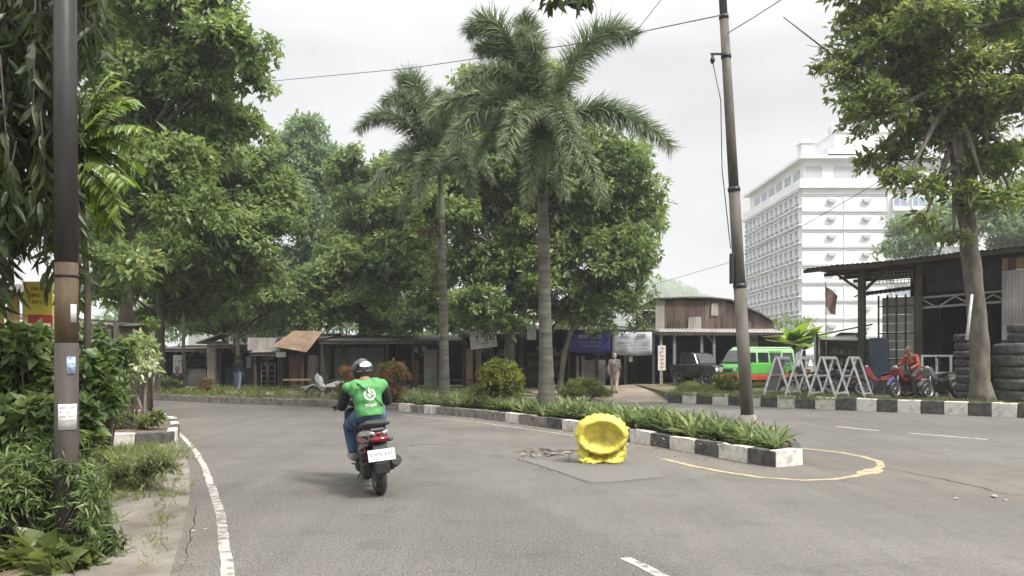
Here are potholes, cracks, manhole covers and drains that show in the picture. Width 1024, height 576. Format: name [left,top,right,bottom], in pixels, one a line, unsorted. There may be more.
pothole [513,448,577,458]
crack [179,505,197,573]
crack [888,469,1019,496]
